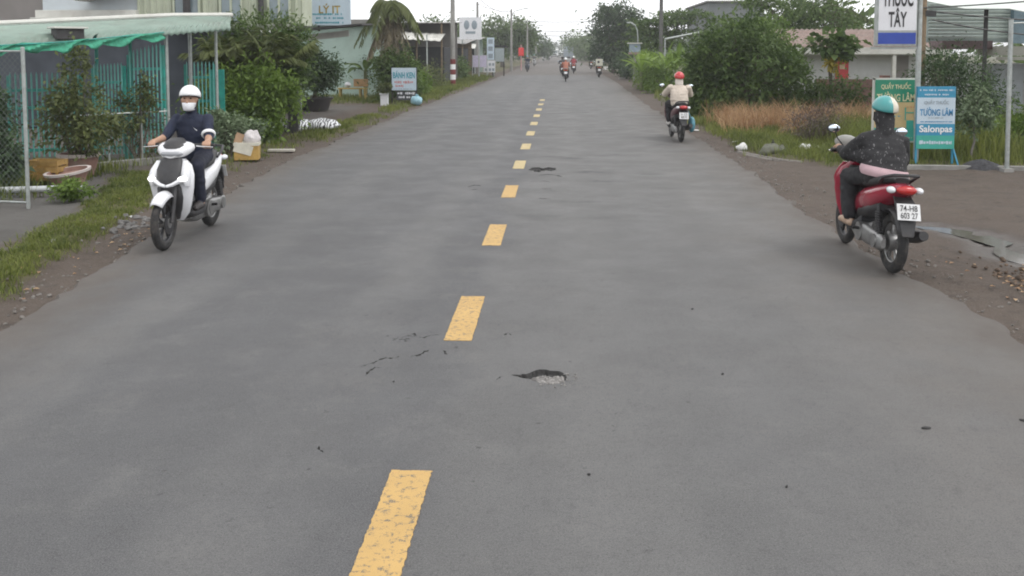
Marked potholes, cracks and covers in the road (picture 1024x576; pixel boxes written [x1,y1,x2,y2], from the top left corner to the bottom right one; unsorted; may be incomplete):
pothole [513,369,579,388]
crack [364,333,447,382]
